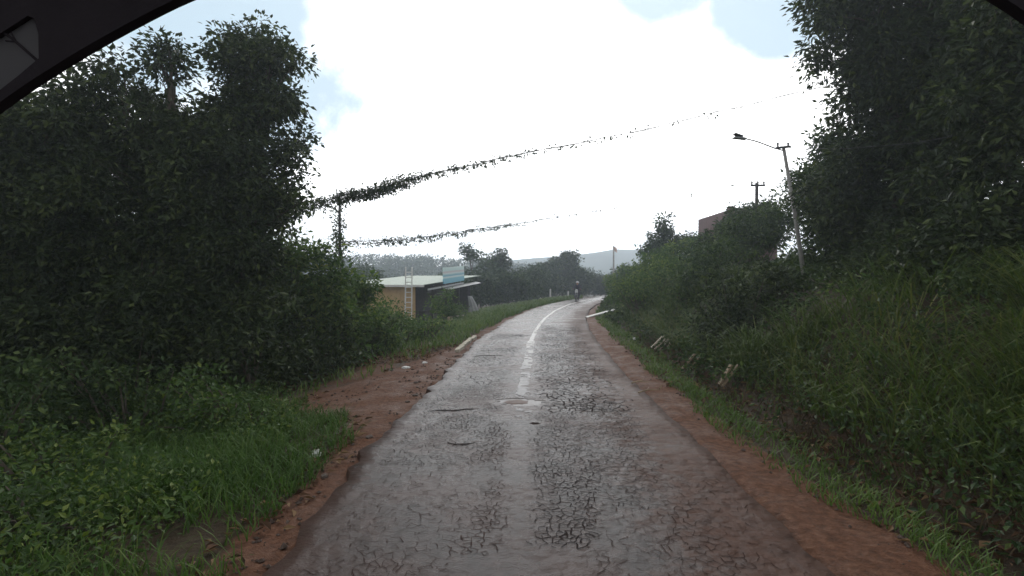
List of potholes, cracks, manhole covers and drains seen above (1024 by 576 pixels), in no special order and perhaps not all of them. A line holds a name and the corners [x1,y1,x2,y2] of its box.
crack [304,333,531,576]
crack [526,326,812,576]
